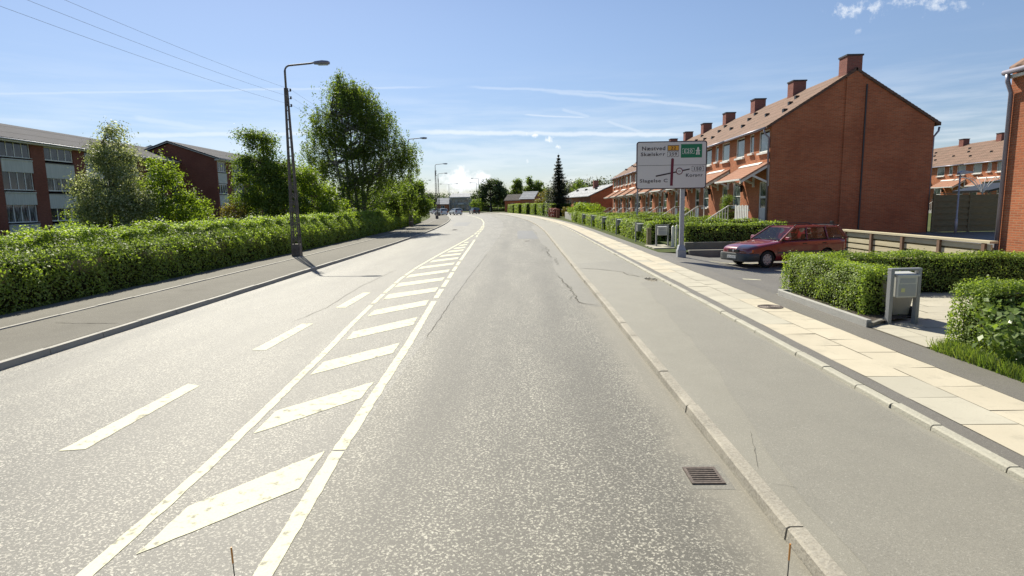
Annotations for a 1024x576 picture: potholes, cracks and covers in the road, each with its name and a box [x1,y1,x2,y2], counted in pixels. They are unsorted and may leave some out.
drain grate [682,467,726,485]
